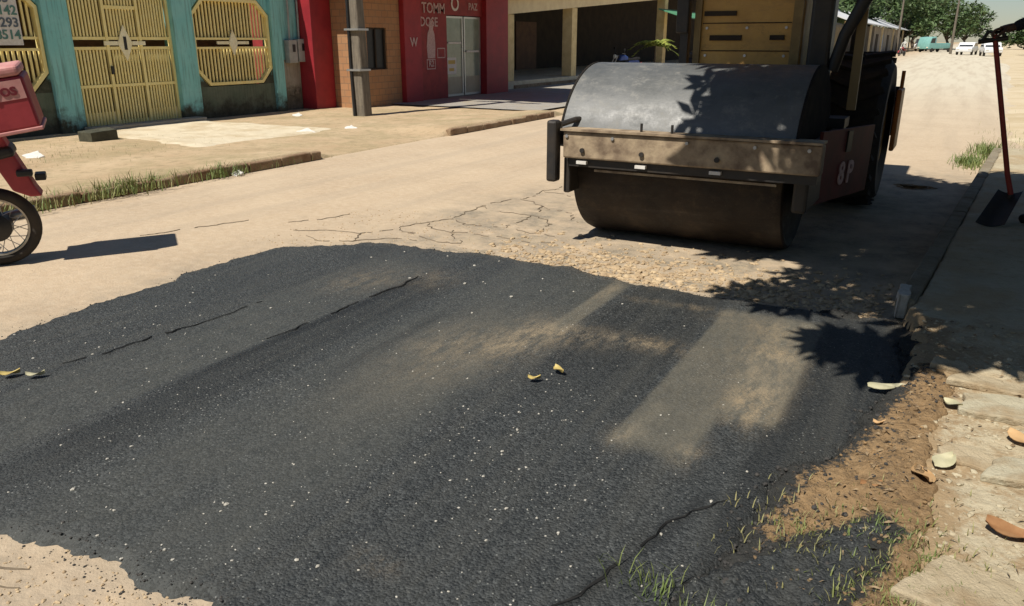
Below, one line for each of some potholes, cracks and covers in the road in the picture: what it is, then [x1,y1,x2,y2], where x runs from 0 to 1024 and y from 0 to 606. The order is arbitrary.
crack [266,276,418,339]
crack [551,500,726,606]
crack [63,301,262,364]
crack [292,186,579,243]
crack [140,220,248,236]
